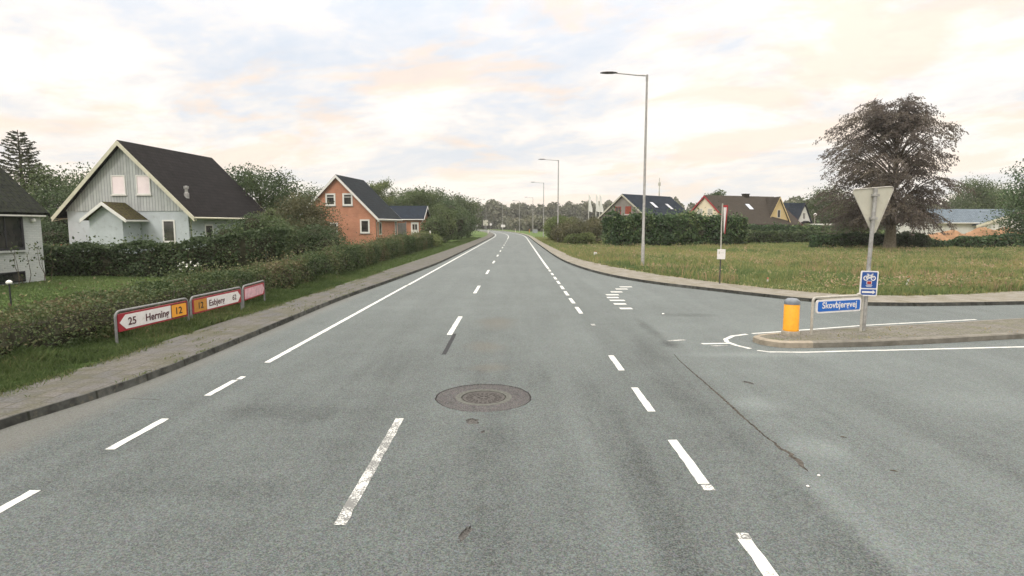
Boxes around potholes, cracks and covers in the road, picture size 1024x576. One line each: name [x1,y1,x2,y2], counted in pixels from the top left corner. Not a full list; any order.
manhole cover [435,384,531,412]
pothole [458,525,473,542]
